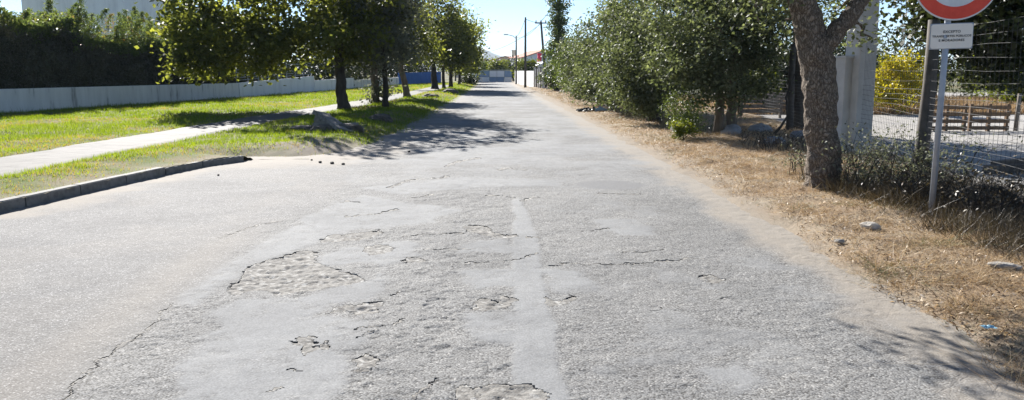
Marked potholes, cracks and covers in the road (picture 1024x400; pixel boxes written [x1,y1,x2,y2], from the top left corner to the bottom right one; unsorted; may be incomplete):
crack [402,232,705,266]
pothole [472,295,519,311]
pothole [455,383,552,400]
pothole [352,353,380,373]
pothole [290,336,331,356]
crack [266,368,298,392]
crack [353,318,405,338]
pothole [227,251,365,296]
pothole [543,295,577,307]
crack [220,220,284,239]
crack [412,377,440,400]
crack [340,157,527,217]
